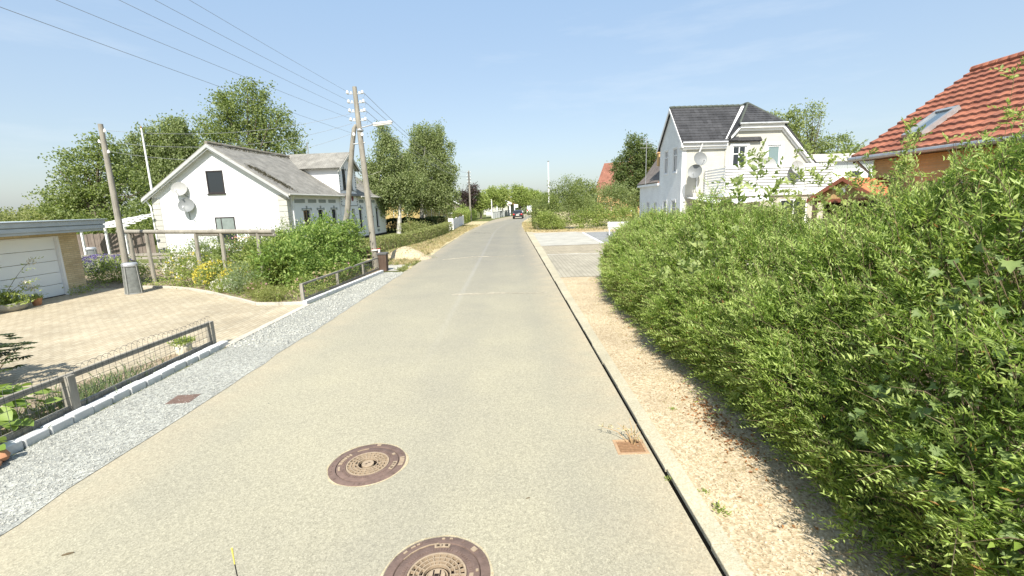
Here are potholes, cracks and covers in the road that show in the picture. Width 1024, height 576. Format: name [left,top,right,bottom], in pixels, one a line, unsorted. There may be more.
drain grate [612,439,650,455]
manhole cover [327,443,409,487]
manhole cover [380,535,494,576]
